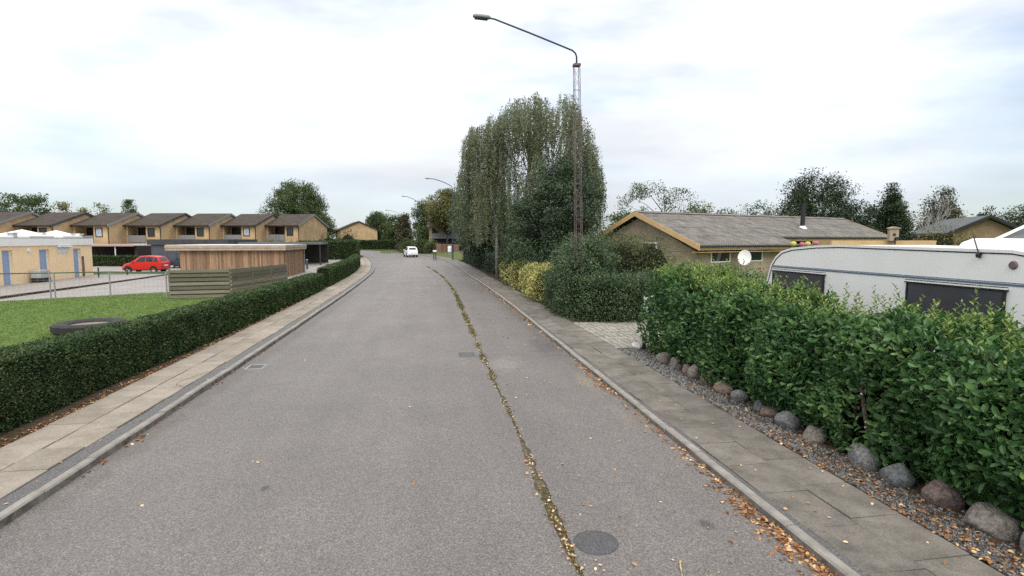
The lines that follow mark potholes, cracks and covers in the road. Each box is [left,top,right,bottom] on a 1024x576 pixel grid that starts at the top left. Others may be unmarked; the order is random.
manhole cover [573,530,619,556]
